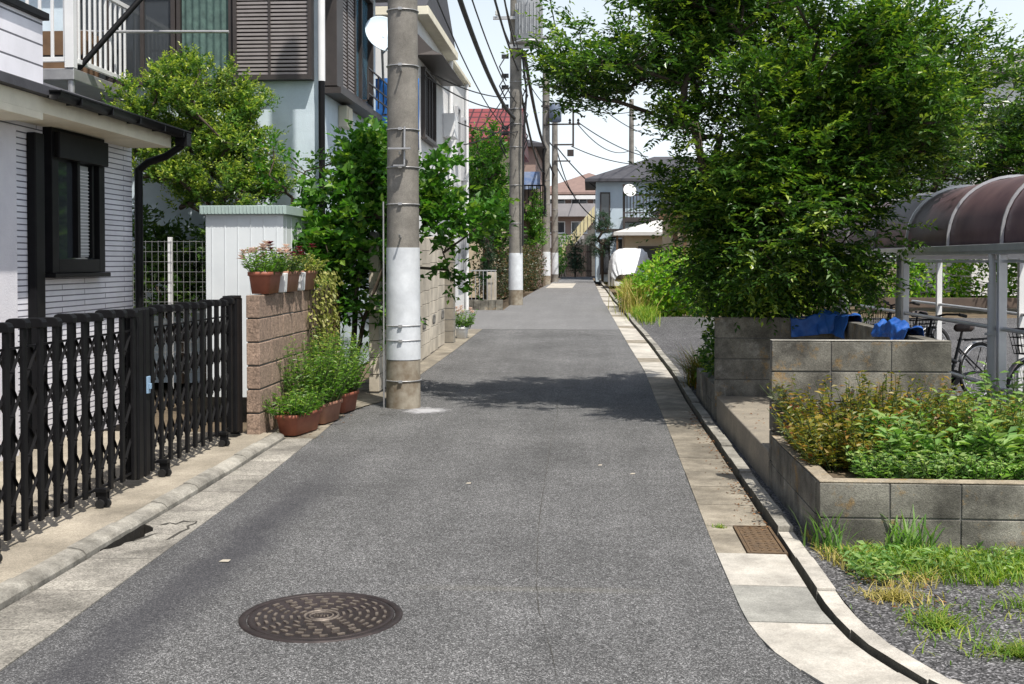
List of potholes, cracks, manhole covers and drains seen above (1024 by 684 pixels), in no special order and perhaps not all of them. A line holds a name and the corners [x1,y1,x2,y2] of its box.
crack [134,520,197,541]
manhole cover [238,592,403,643]
